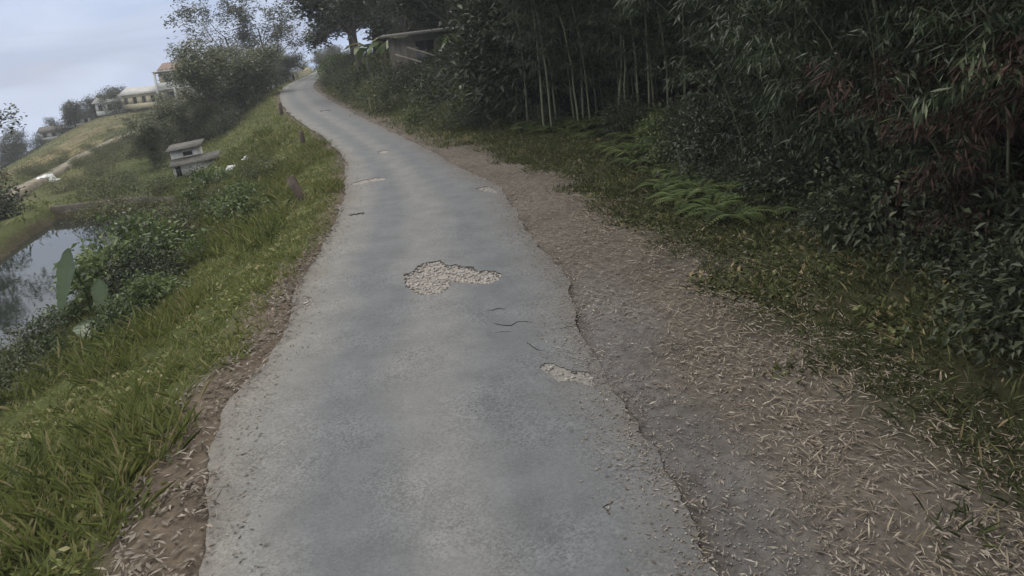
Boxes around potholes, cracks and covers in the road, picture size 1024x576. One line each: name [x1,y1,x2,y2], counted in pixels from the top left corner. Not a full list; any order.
pothole [540,363,597,386]
pothole [403,260,502,295]
